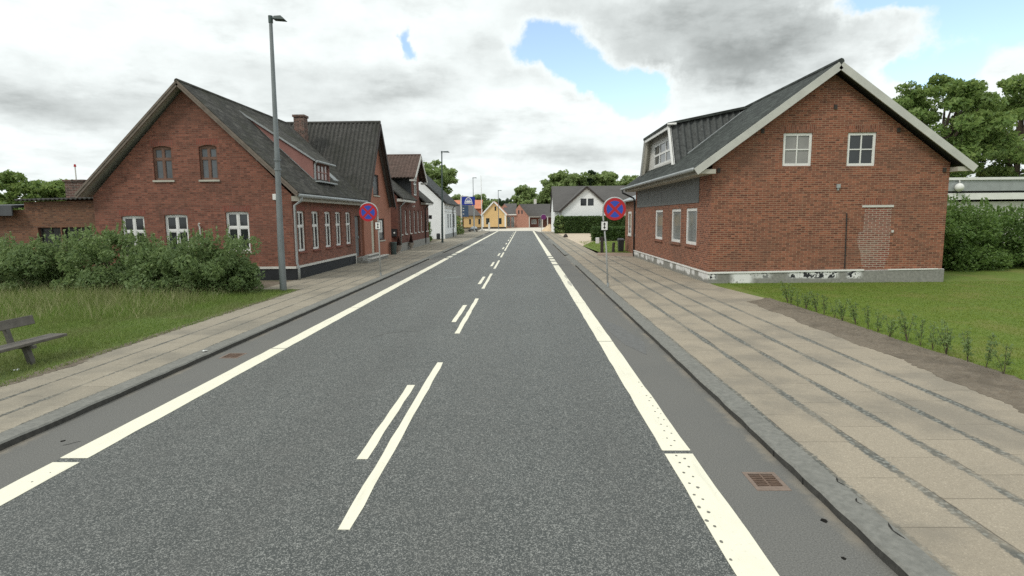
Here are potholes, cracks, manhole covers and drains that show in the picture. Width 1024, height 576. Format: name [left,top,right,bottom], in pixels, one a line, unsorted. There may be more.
drain grate [742,472,792,491]
